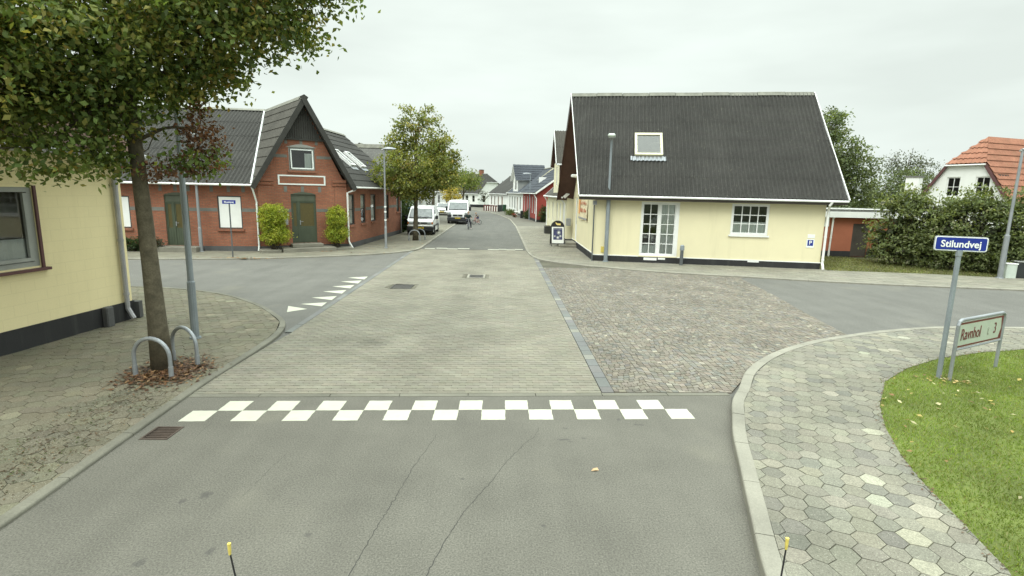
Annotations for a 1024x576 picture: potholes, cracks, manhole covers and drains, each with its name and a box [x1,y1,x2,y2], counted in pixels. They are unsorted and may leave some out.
crack [426,427,539,576]
crack [348,436,436,576]
drain grate [139,426,184,440]
